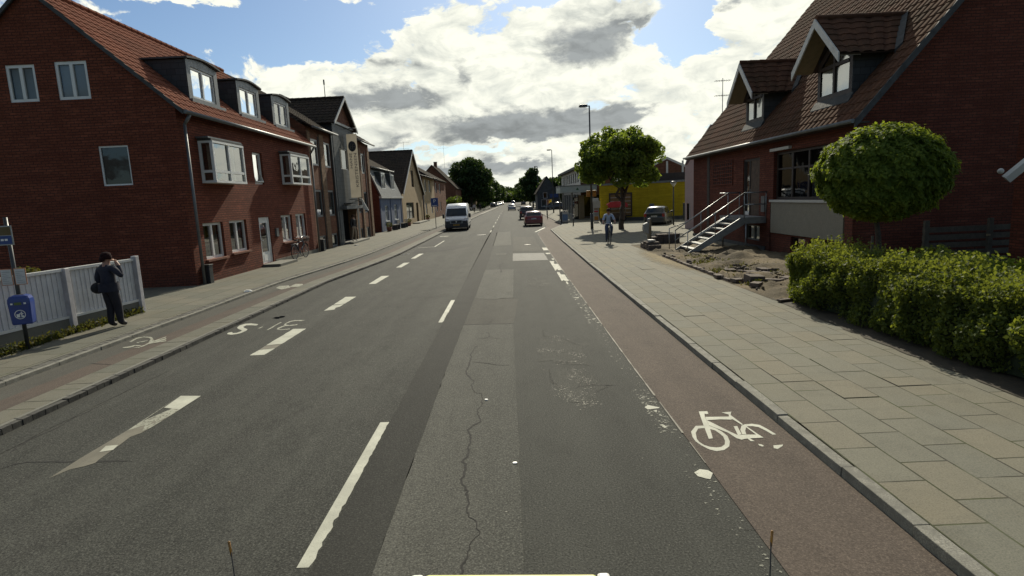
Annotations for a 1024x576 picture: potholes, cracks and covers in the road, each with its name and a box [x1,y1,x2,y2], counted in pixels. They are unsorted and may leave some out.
crack [460,320,511,575]
